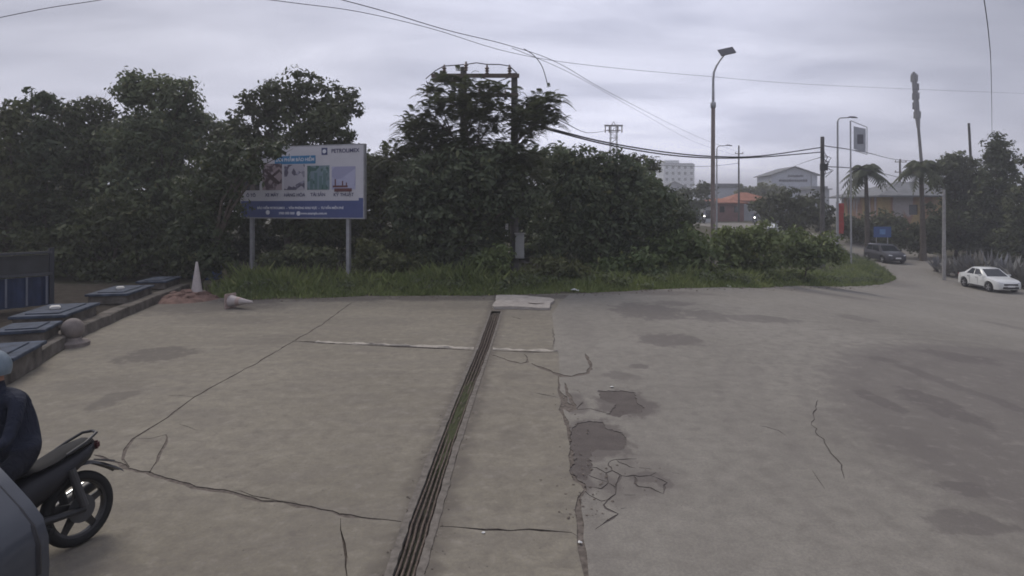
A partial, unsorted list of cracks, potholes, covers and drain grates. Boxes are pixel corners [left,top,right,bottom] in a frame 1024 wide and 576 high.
crack [95,455,401,576]
crack [811,402,845,486]
crack [440,328,679,576]
pothole [569,421,626,481]
pothole [597,390,644,418]
